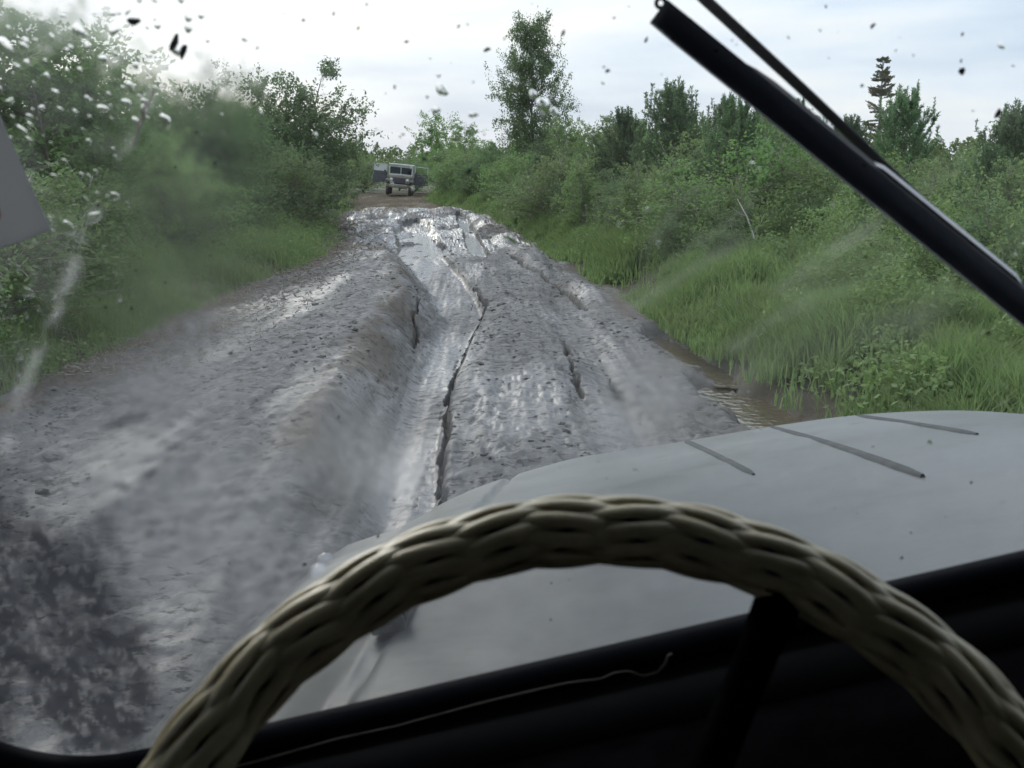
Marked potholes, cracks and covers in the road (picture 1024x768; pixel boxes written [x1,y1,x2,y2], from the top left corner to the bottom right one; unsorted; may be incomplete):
crack [412,287,490,506]
crack [563,340,613,399]
